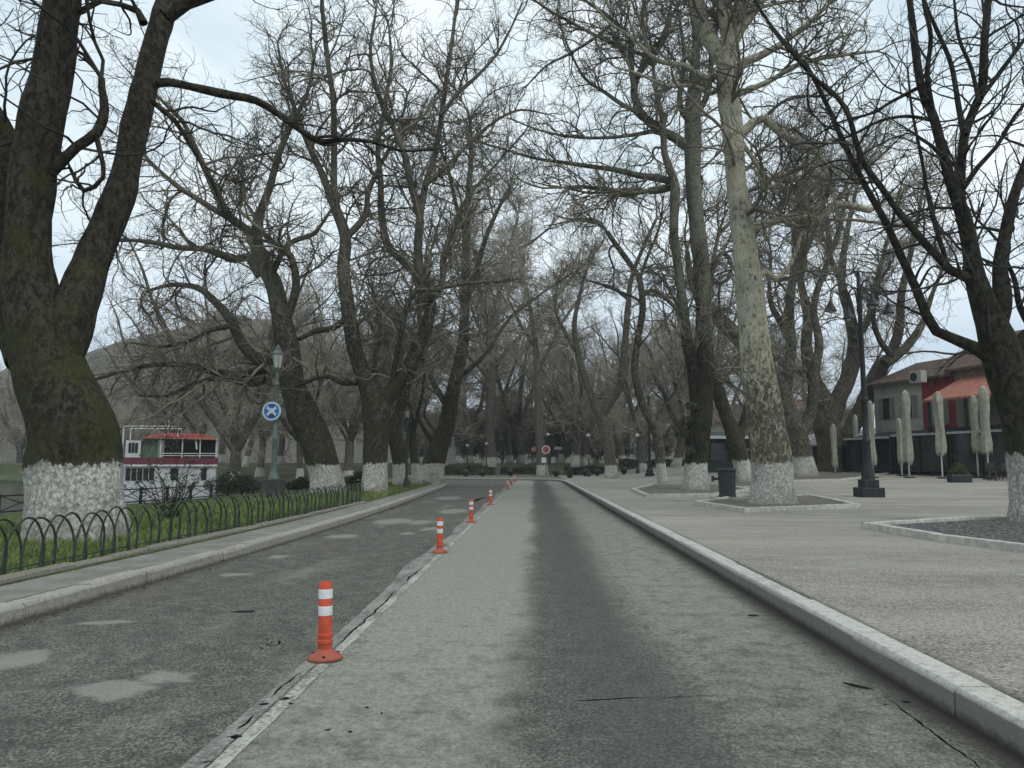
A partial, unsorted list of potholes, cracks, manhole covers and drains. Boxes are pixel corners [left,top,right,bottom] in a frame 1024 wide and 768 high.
crack [887,698,980,768]
